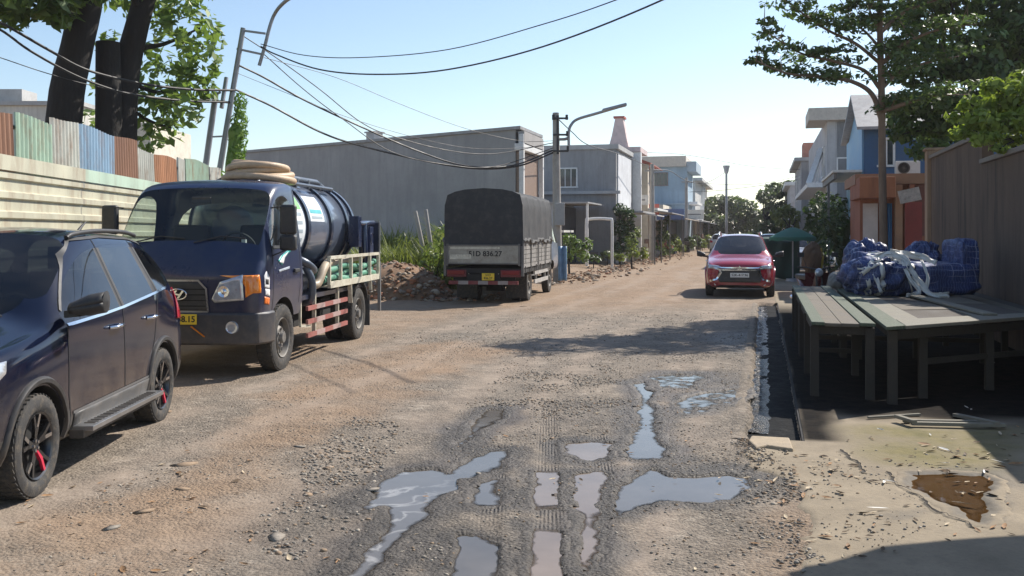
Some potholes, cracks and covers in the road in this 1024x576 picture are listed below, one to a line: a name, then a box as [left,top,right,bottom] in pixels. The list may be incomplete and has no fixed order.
pothole [642,372,717,391]
pothole [552,439,630,464]
pothole [551,469,617,576]
crack [885,471,975,529]
pothole [594,465,767,519]
pothole [515,527,587,576]
pothole [668,386,758,416]
pothole [893,469,1013,528]
pothole [520,469,579,512]
pothole [319,446,519,576]
pothole [441,406,519,451]
pothole [607,380,677,462]
